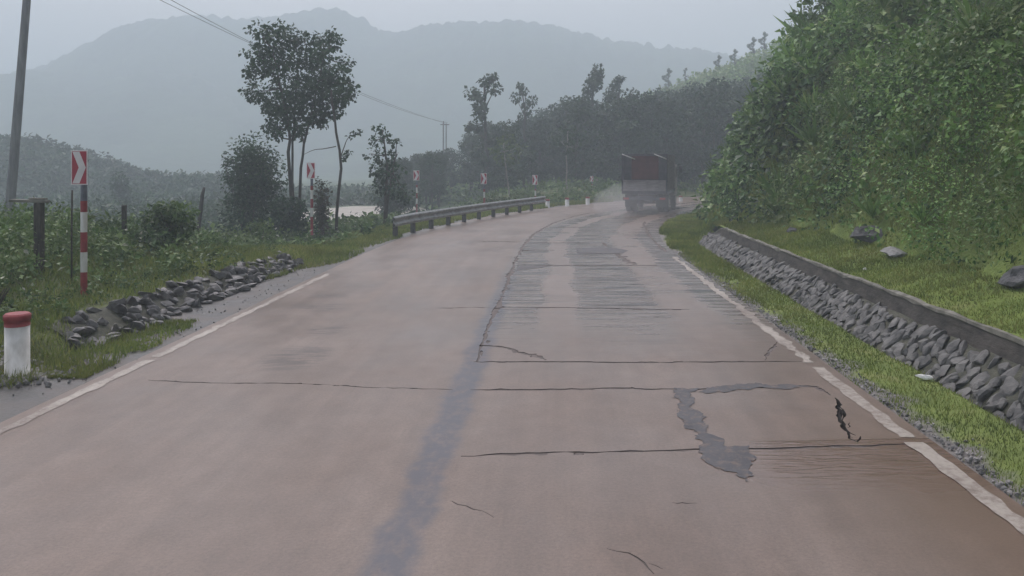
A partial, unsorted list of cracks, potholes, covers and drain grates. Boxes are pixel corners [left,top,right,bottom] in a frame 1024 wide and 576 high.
crack [461,213,802,363]
crack [461,385,933,457]
crack [609,549,662,574]
